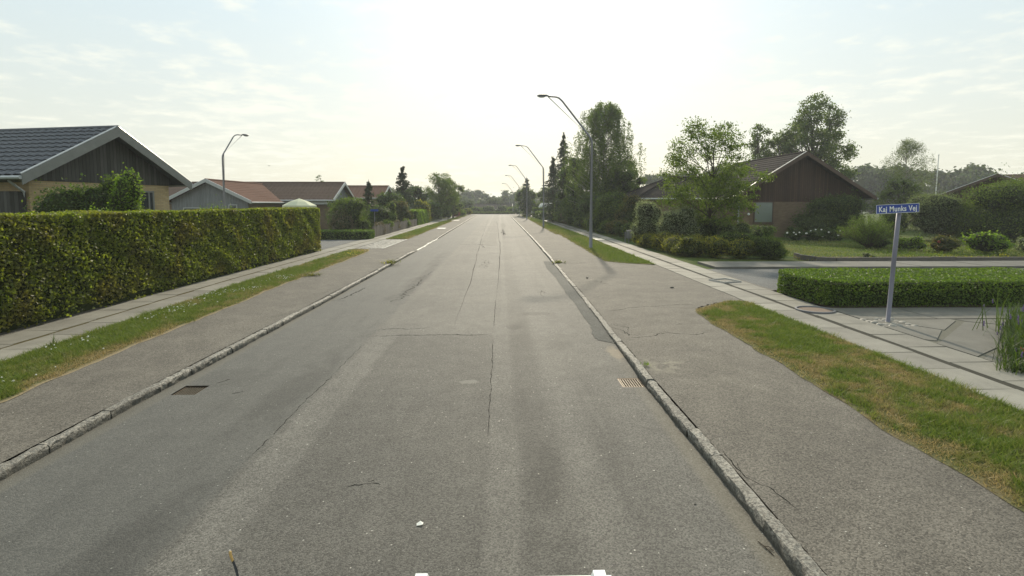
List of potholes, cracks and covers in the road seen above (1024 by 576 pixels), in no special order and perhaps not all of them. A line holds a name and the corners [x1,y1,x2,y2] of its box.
crack [723,451,797,509]
crack [253,345,362,454]
drain grate [173,387,207,395]
crack [605,303,715,338]
crack [382,220,506,432]
manhole cover [795,306,836,314]
drain grate [617,378,645,387]
